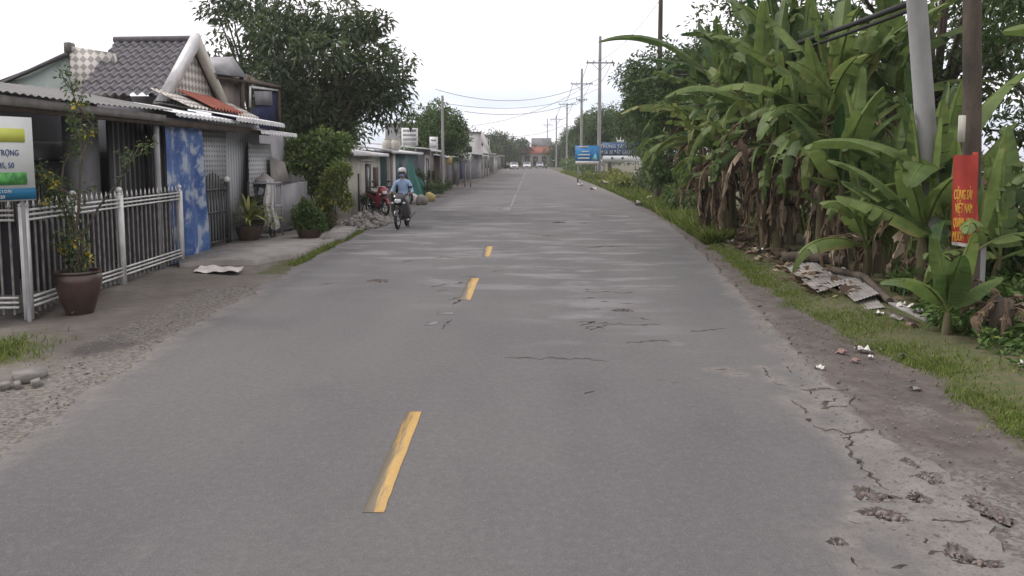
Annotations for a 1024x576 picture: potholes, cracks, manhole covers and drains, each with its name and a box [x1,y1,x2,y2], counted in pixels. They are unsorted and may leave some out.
crack [580,289,716,344]
pothole [939,543,975,564]
crack [763,367,920,500]
pothole [962,495,1014,527]
pothole [851,486,897,503]
pothole [853,506,911,523]
pothole [952,558,1005,569]
